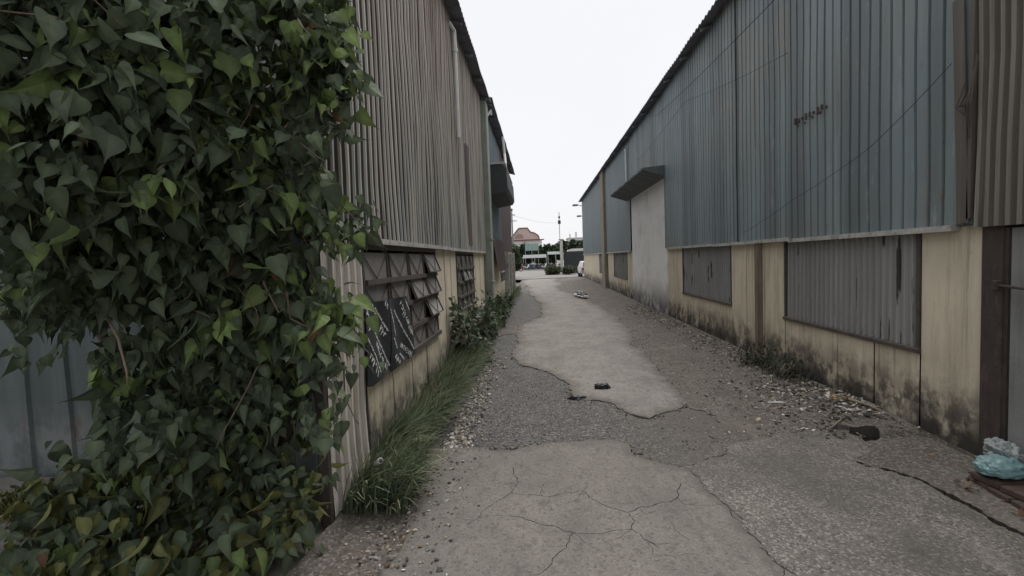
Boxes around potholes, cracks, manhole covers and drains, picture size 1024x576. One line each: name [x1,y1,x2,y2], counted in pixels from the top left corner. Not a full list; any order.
pothole [849,425,881,441]
crack [460,452,785,576]
